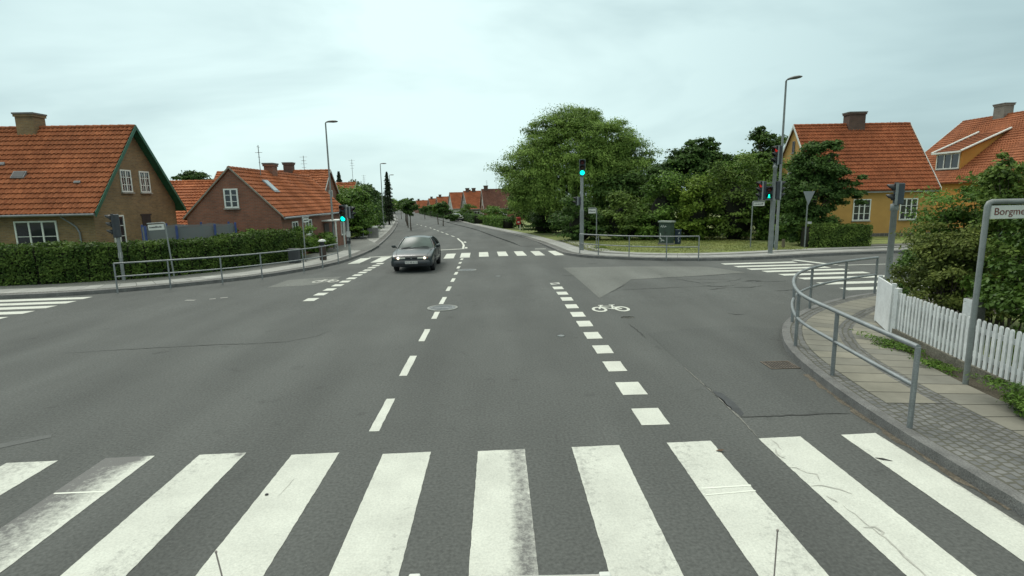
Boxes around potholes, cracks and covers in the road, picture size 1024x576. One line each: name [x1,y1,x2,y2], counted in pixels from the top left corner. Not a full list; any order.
crack [699,380,850,417]
drain grate [760,361,800,369]
